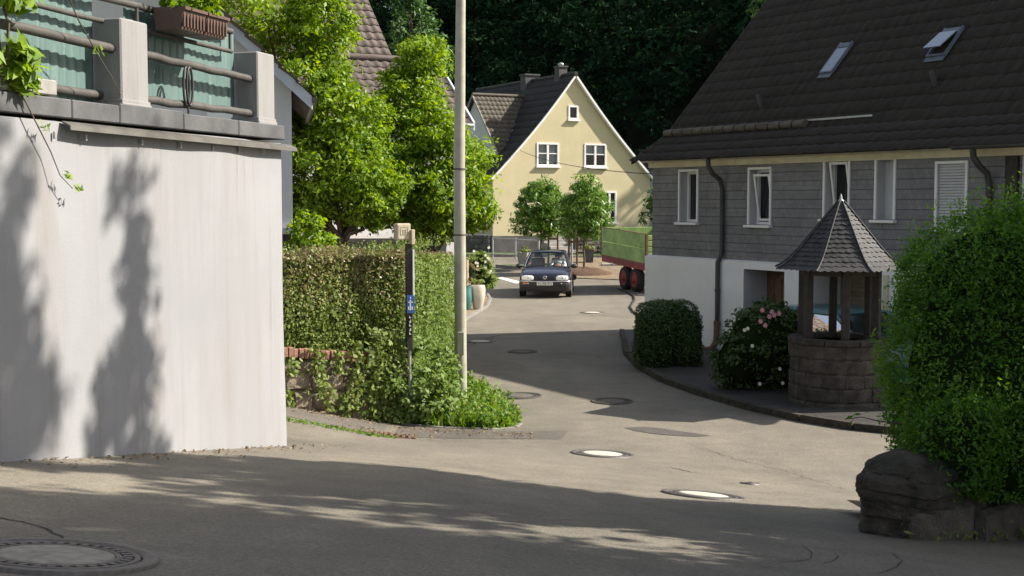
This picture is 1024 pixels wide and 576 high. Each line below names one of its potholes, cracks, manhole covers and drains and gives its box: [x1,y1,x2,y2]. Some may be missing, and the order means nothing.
manhole cover [661,489,746,501]
manhole cover [0,538,160,576]
manhole cover [571,449,634,458]
manhole cover [591,397,633,405]
crack [0,517,64,538]
